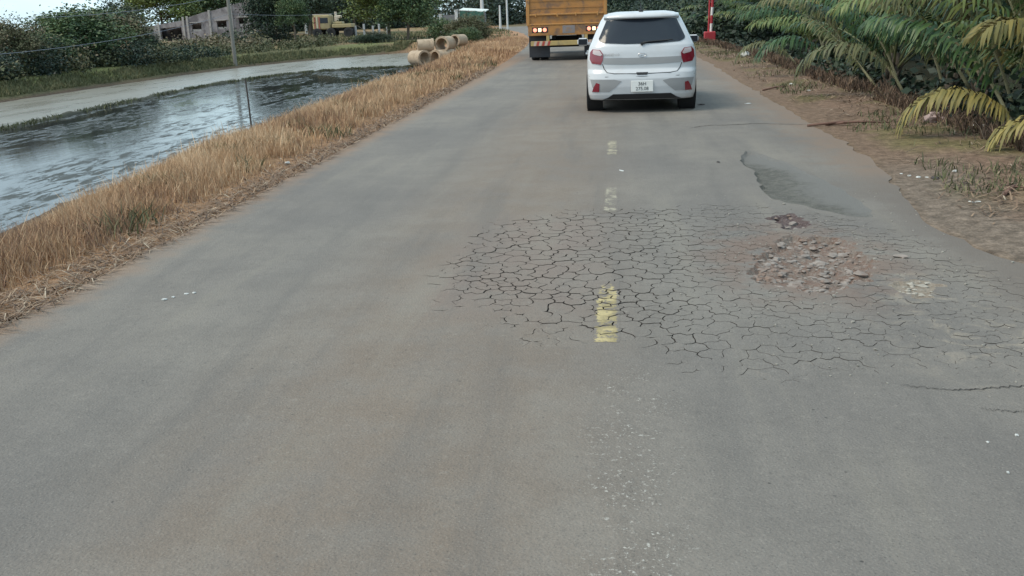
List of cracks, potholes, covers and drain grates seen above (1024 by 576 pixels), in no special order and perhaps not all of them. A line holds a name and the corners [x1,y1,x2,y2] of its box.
pothole [745,234,881,293]
crack [432,204,1024,383]
pothole [764,213,812,230]
pothole [888,279,947,299]
